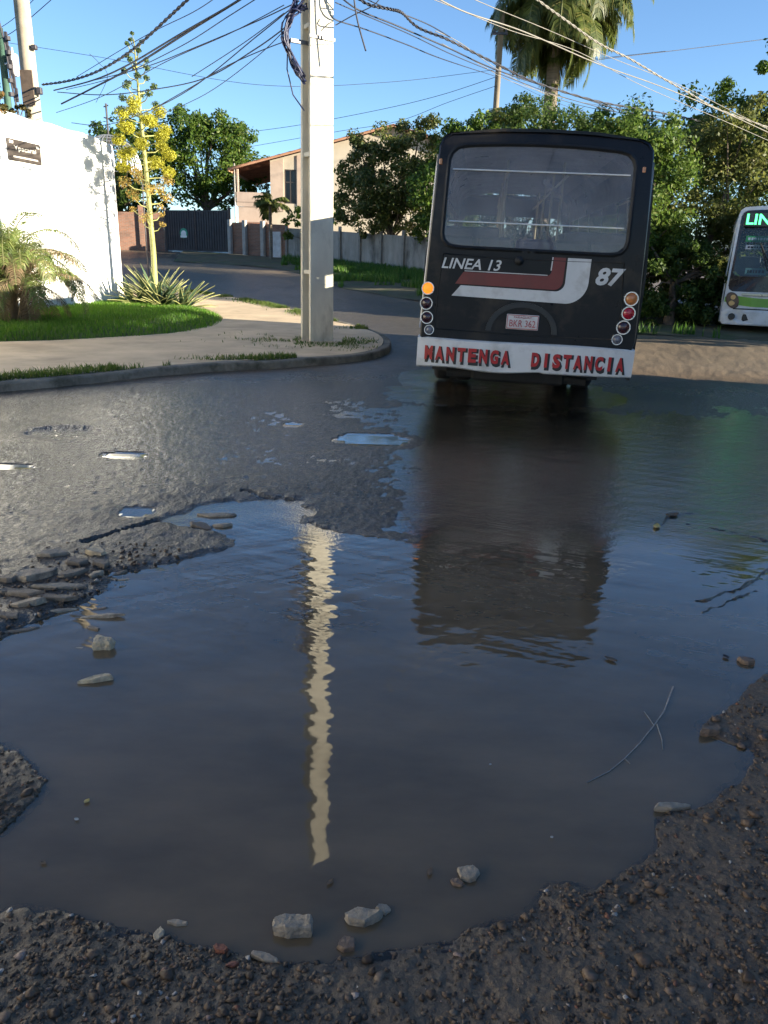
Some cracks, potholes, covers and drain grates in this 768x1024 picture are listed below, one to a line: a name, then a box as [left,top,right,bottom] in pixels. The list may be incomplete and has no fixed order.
pothole [330,431,413,447]
pothole [19,424,108,440]
pothole [0,499,765,965]
